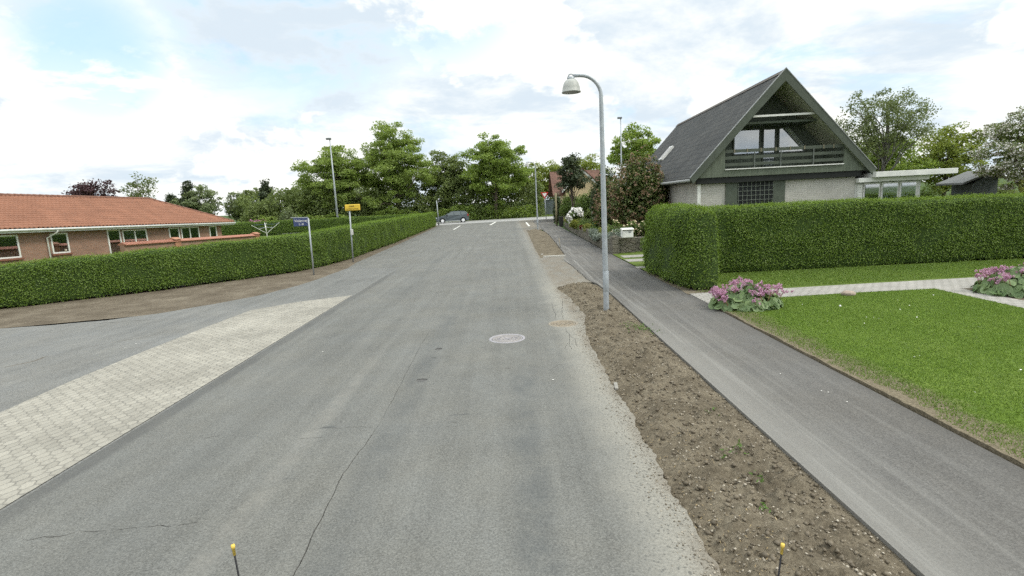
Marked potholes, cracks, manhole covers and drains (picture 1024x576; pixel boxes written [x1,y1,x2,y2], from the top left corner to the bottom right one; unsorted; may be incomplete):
manhole cover [489,334,525,343]
crack [26,522,197,541]
crack [293,334,448,576]
